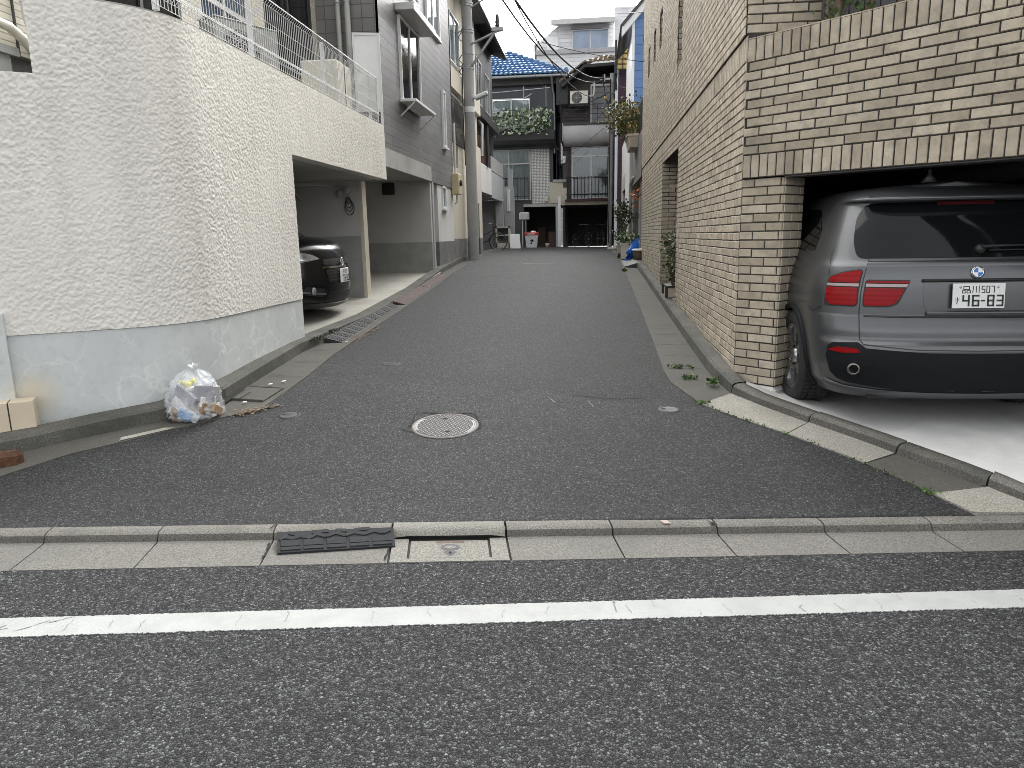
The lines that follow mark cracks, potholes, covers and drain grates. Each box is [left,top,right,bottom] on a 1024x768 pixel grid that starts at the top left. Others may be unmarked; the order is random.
manhole cover [411,414,479,439]
utility cover [277,411,301,419]
